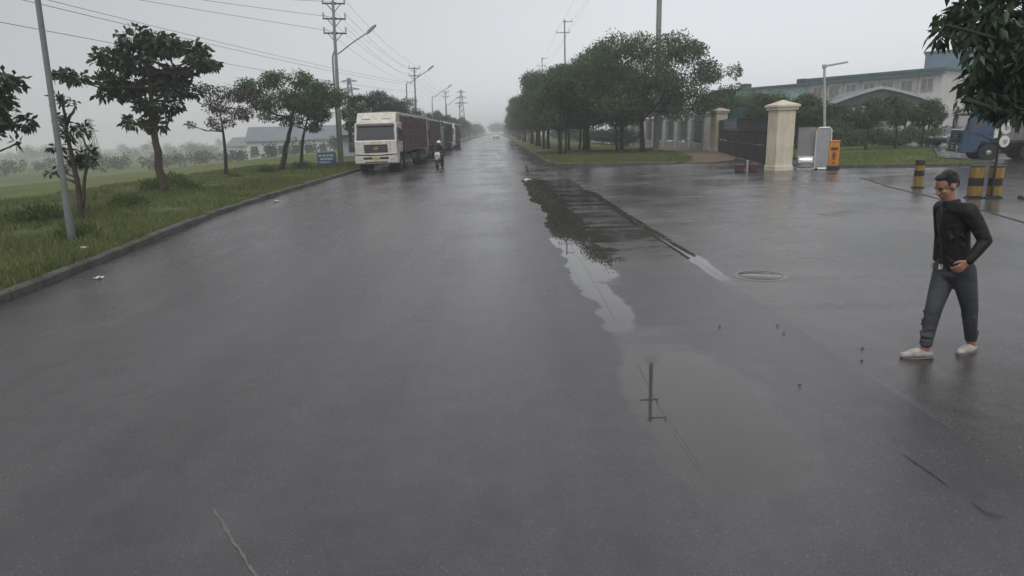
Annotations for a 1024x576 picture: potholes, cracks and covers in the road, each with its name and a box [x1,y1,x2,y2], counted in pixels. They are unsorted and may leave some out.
manhole cover [732,270,790,282]
crack [210,503,259,576]
